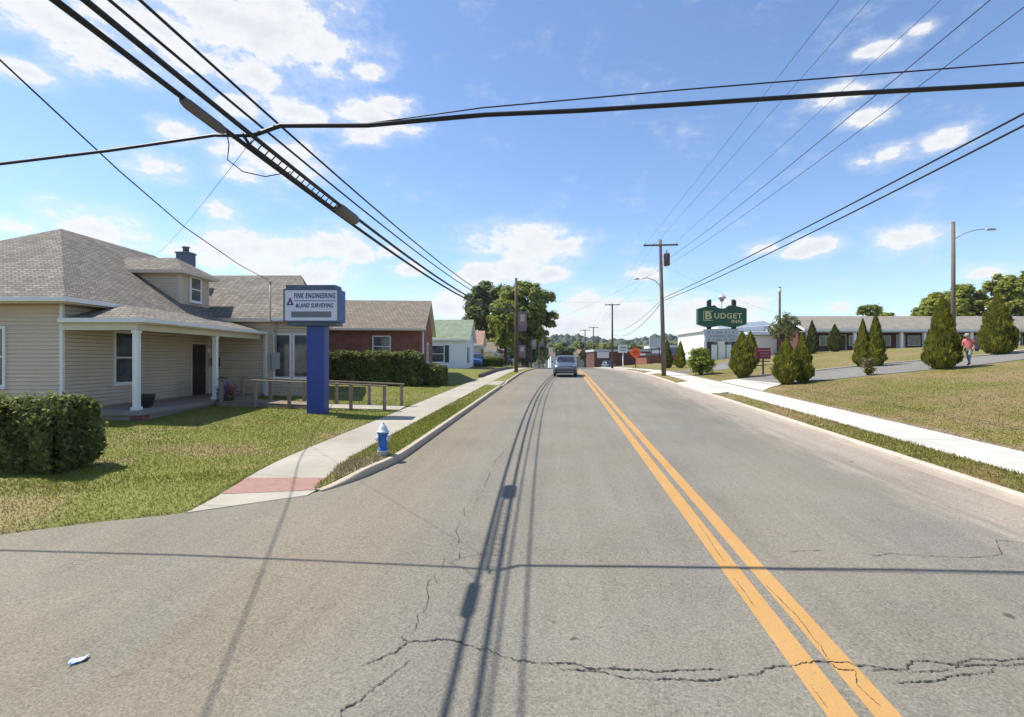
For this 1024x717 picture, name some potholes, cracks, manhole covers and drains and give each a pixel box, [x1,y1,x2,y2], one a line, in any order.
crack [340,455,1024,716]
